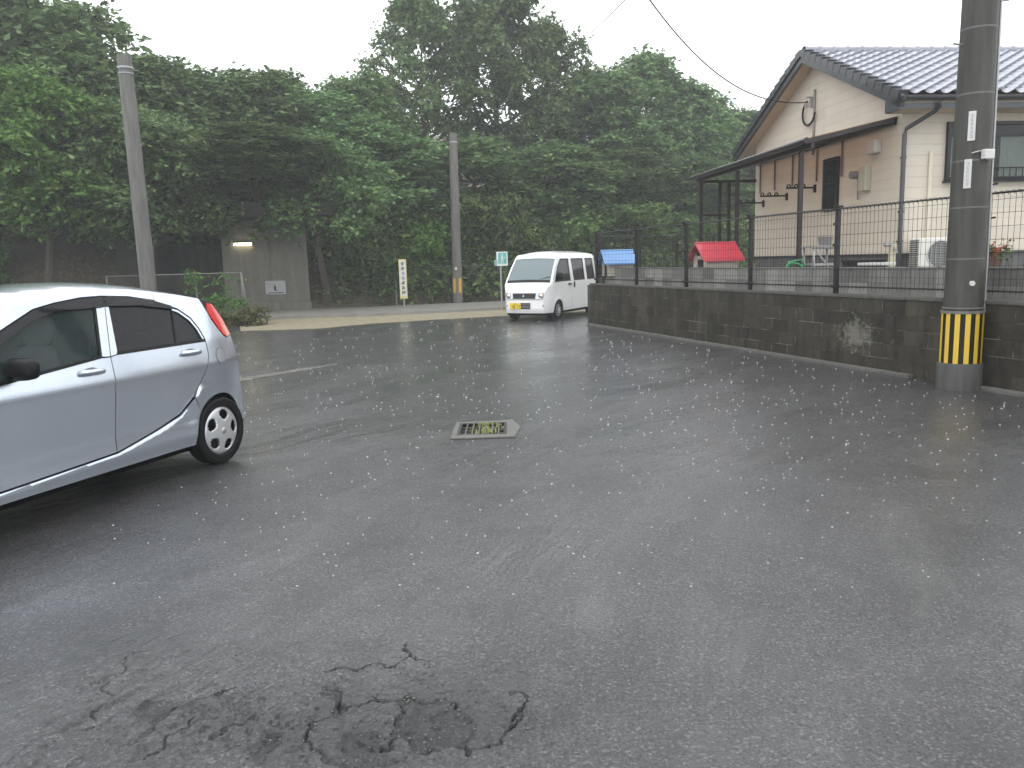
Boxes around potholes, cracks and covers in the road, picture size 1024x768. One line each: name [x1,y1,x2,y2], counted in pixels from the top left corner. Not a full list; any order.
pothole [334,731,401,768]
pothole [396,700,477,750]
crack [79,651,256,761]
drain grate [450,419,521,440]
